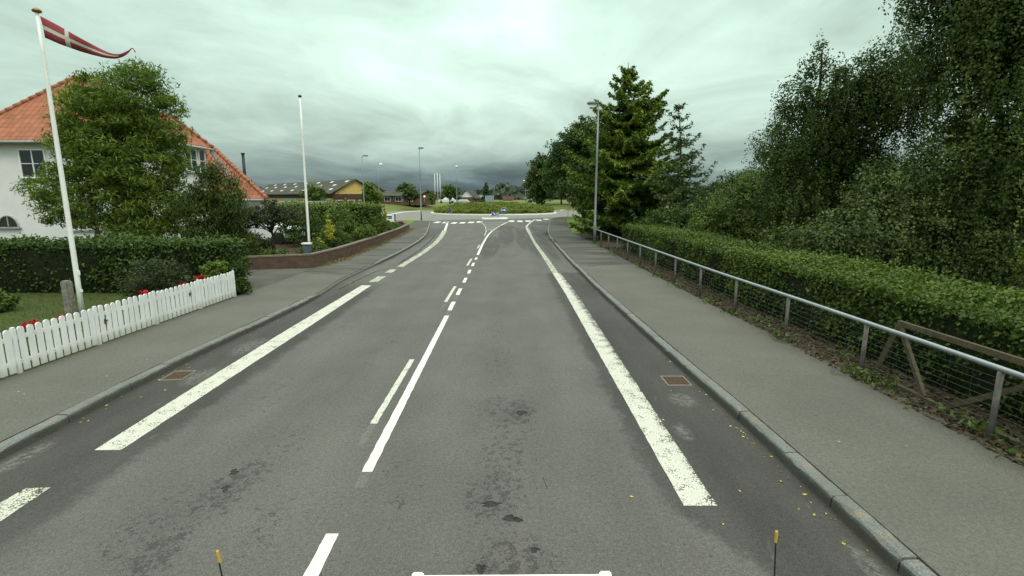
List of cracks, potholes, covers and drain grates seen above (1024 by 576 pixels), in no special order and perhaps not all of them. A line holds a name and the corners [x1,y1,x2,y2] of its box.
pothole [501,514,524,523]
drain grate [158,370,197,381]
drain grate [660,376,693,386]
